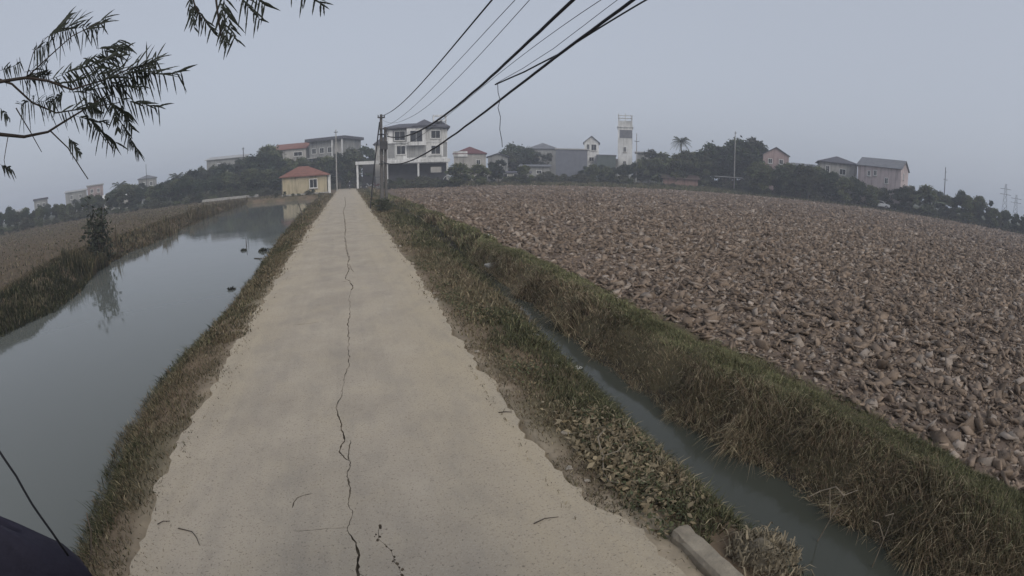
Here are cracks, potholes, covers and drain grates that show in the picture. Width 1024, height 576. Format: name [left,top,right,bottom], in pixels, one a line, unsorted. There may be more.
crack [301,201,404,576]
